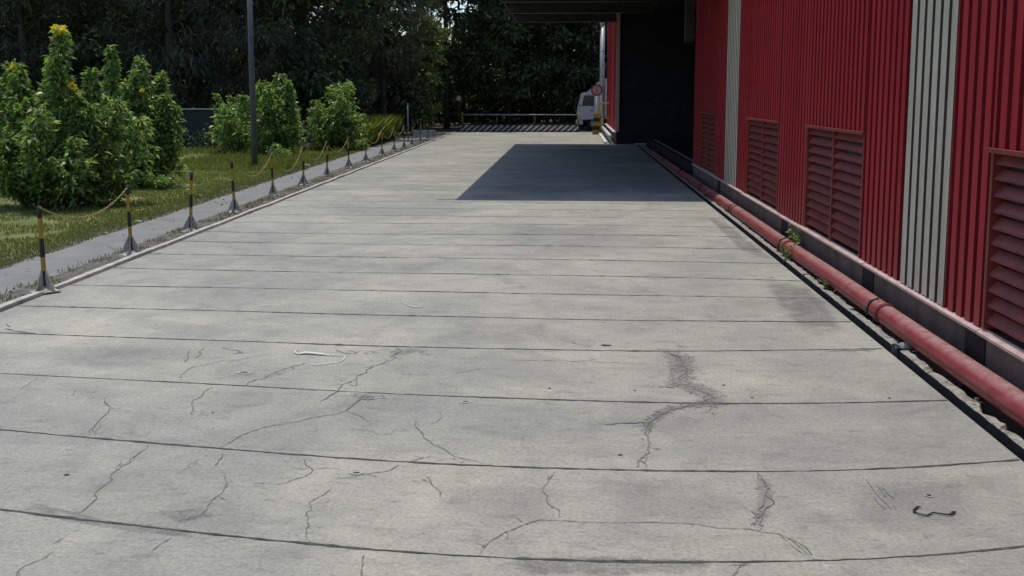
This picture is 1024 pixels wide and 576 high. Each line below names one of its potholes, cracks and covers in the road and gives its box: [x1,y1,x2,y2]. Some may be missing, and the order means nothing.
crack [474,472,811,557]
crack [602,341,728,467]
crack [305,412,492,543]
crack [176,348,491,521]
crack [78,445,148,513]
